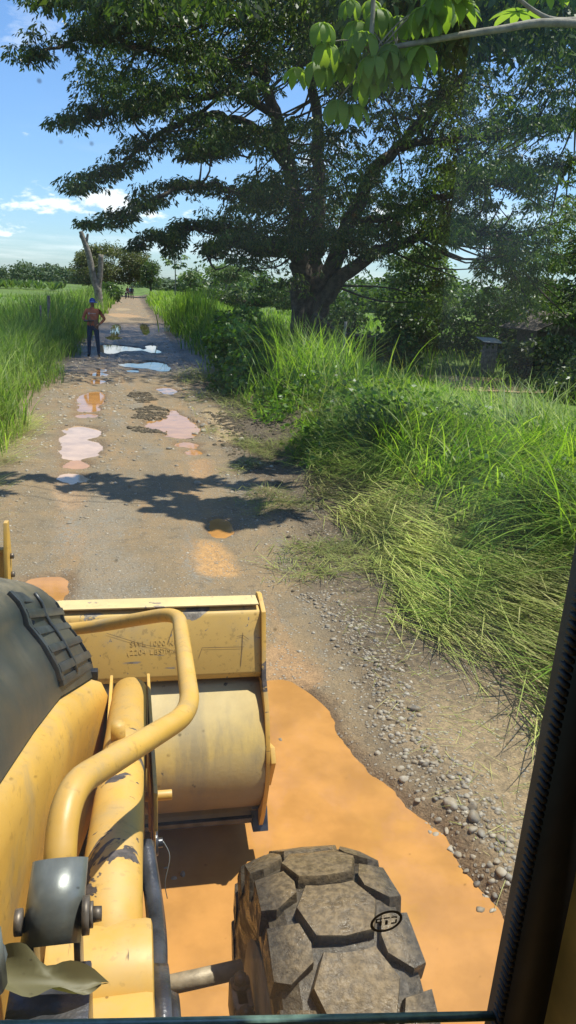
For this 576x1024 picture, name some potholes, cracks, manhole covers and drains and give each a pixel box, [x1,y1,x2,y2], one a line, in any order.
pothole [47,422,114,461]
pothole [198,515,245,539]
pothole [42,673,513,1024]
pothole [113,360,176,372]
pothole [135,408,208,440]
pothole [95,344,143,354]
pothole [141,343,164,353]
pothole [13,570,85,601]
pothole [53,458,100,470]
pothole [66,390,111,413]
